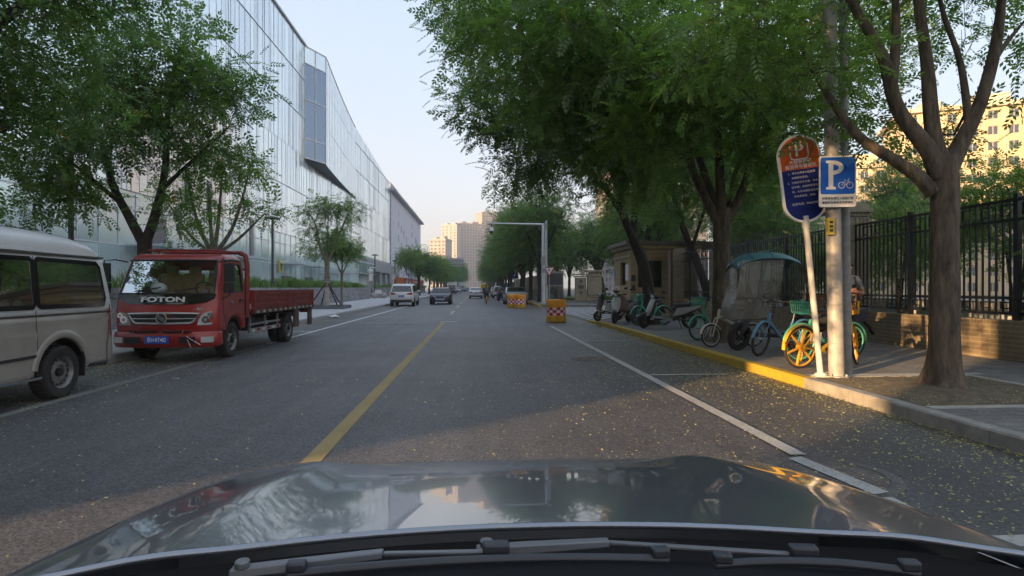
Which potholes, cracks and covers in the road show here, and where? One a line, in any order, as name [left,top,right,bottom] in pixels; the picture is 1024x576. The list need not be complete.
manhole cover [768,456,907,496]
